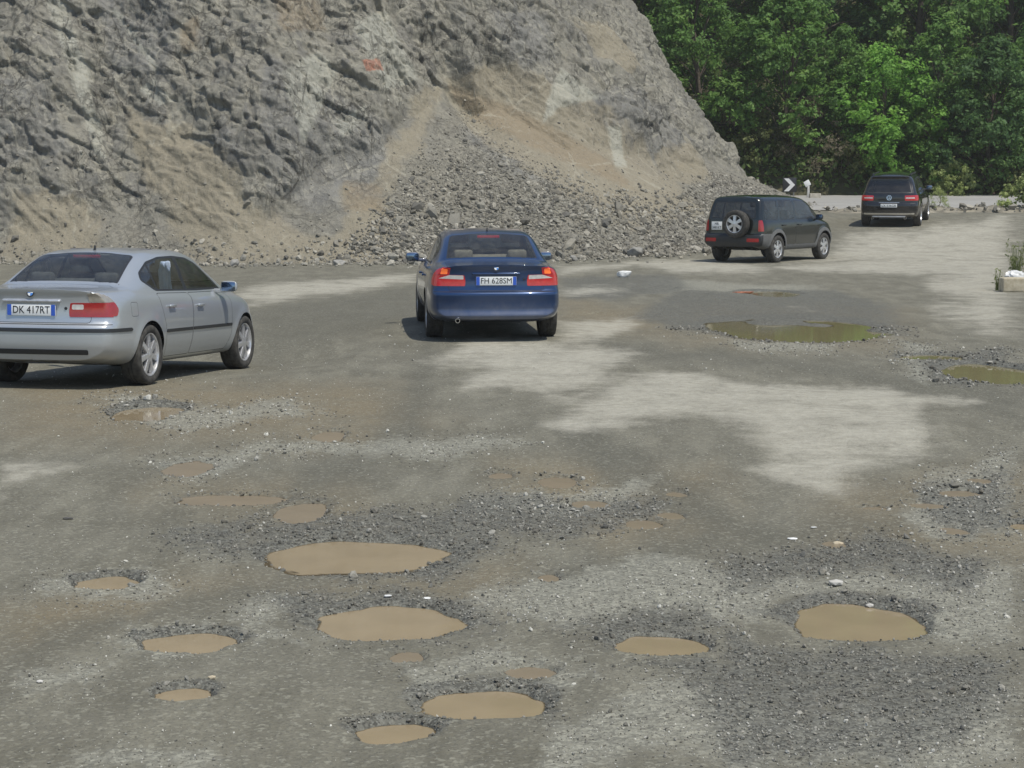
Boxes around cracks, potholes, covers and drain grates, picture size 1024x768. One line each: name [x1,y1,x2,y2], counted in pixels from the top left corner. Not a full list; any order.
pothole [167,490,302,507]
pothole [600,629,720,657]
pothole [265,496,339,526]
pothole [401,680,563,720]
pothole [341,714,447,745]
pothole [150,458,221,478]
pothole [66,569,146,590]
pothole [731,289,809,297]
pothole [930,358,1024,385]
pothole [497,662,567,680]
pothole [246,531,470,577]
pothole [145,681,222,701]
